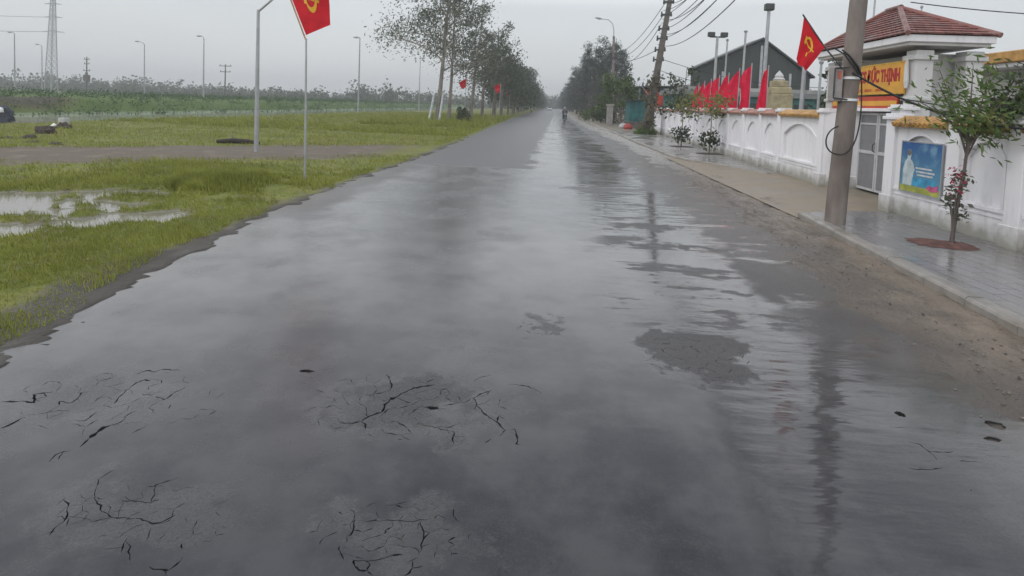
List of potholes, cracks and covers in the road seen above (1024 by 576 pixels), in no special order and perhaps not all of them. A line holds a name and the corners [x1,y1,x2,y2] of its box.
crack [309,501,471,576]
crack [309,375,519,445]
crack [46,470,228,572]
crack [2,369,224,460]
crack [910,442,981,470]
